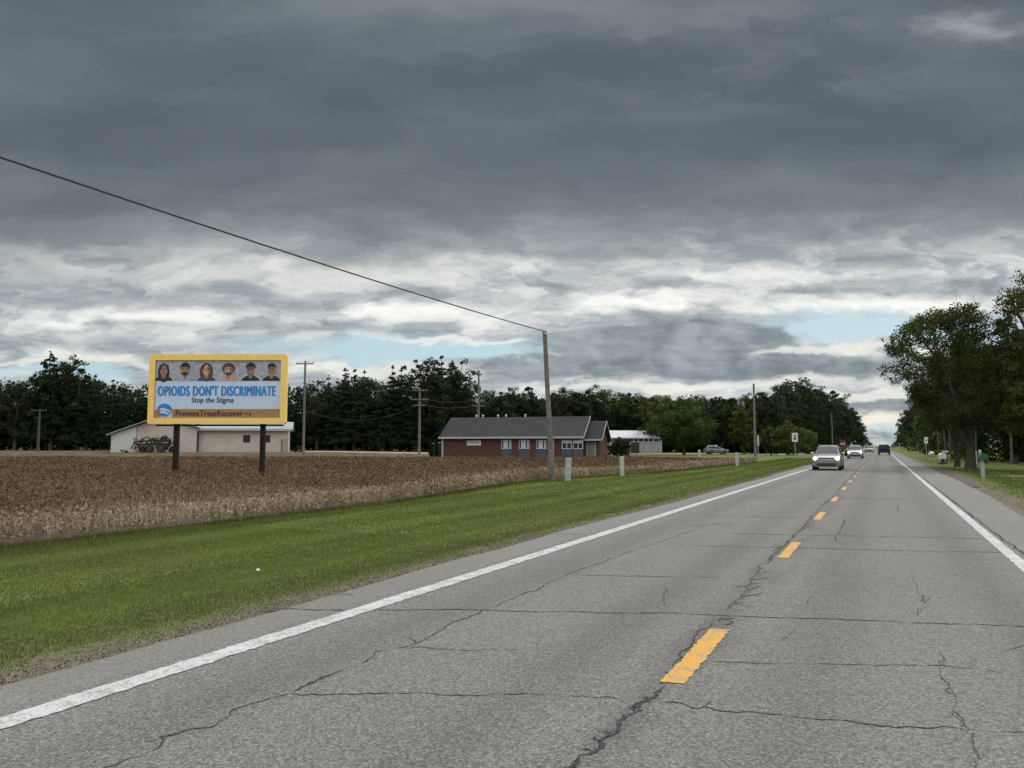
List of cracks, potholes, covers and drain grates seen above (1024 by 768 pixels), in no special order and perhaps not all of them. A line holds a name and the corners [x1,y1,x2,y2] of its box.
crack [103,463,1024,768]
